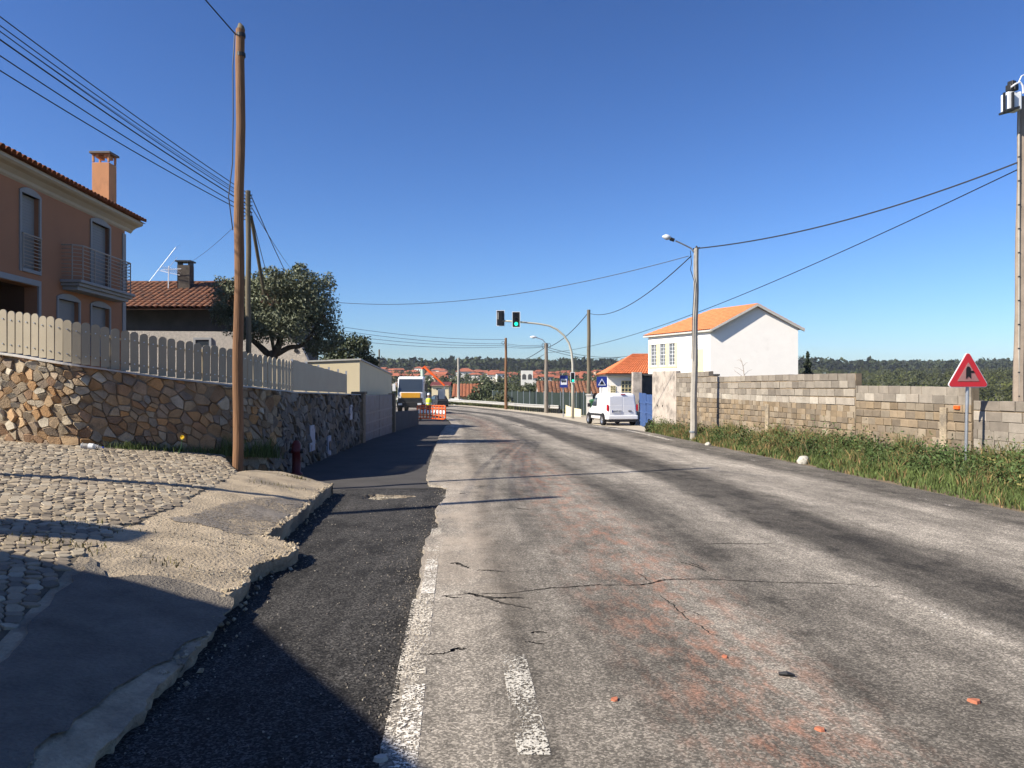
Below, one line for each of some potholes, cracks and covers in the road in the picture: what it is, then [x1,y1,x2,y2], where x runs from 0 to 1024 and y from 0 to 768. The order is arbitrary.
crack [420,647,467,655]
crack [444,562,887,636]
